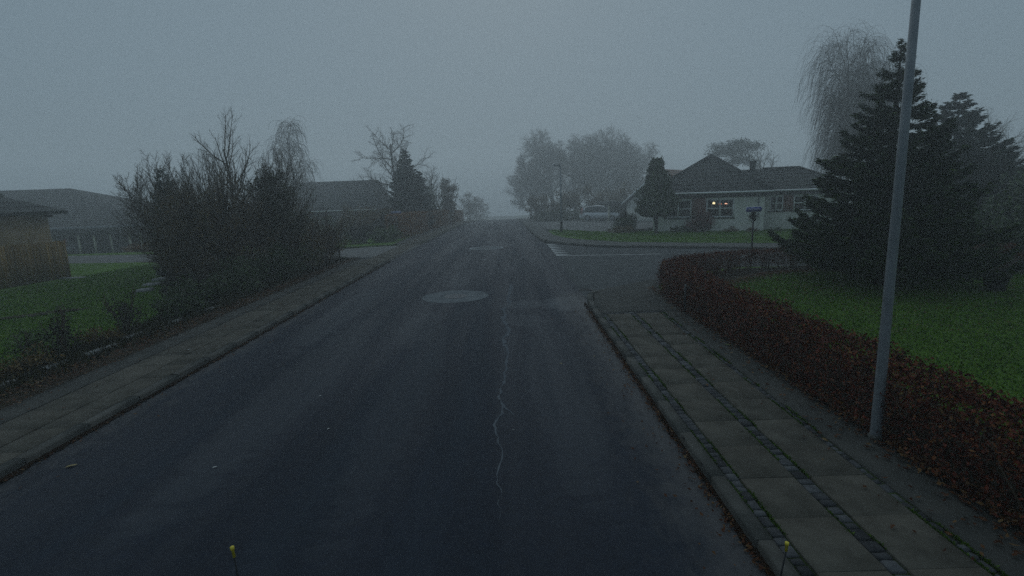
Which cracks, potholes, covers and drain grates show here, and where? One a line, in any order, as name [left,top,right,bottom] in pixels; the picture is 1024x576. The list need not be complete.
manhole cover [422,290,489,303]
crack [493,283,521,519]
